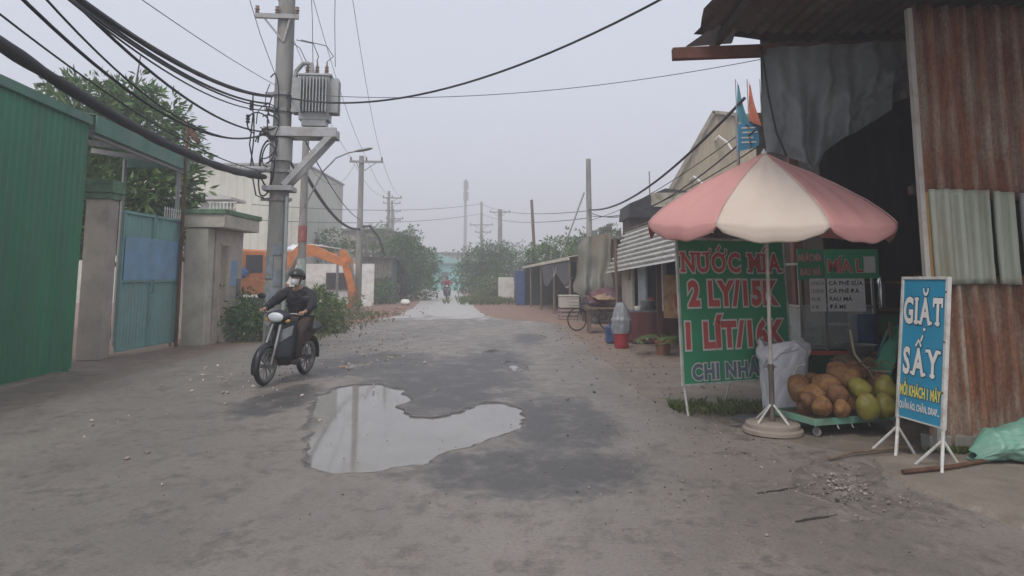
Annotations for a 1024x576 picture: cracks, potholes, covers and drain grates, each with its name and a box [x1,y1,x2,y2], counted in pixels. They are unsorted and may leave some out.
pothole [786,461,930,523]
pothole [500,360,529,372]
pothole [299,383,528,474]
